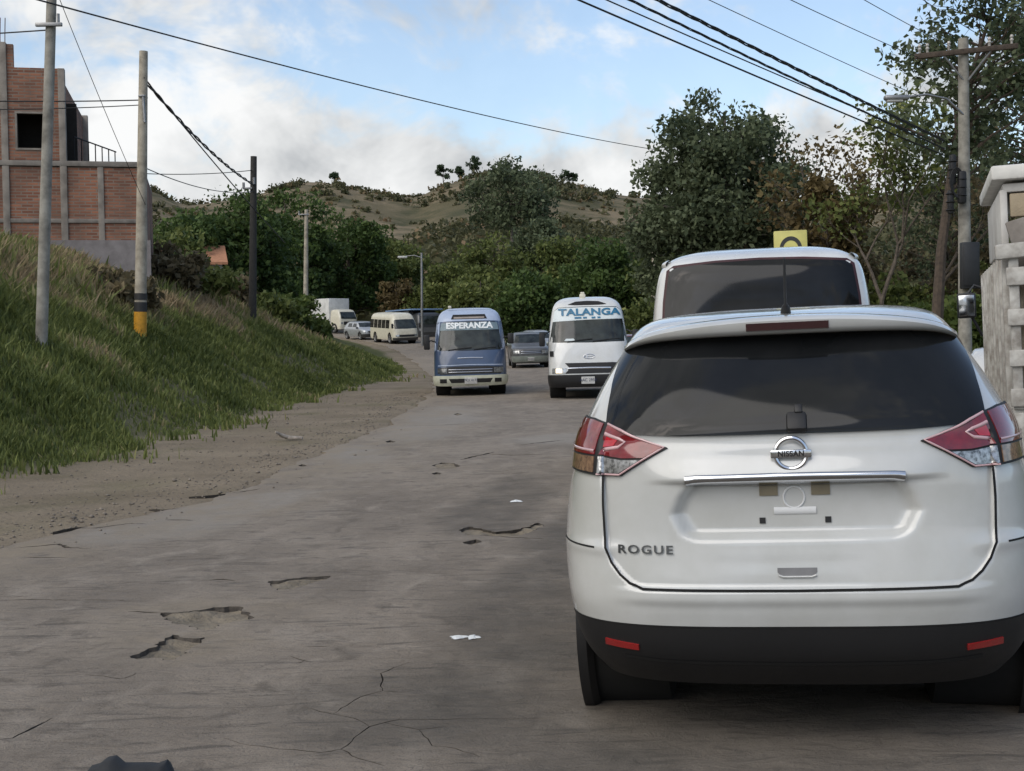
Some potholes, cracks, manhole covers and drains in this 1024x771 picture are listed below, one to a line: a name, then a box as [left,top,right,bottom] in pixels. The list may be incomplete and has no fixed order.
pothole [130,635,205,660]
pothole [268,576,330,590]
crack [225,666,545,766]
crack [461,440,560,460]
pothole [160,607,254,629]
pothole [459,523,544,537]
